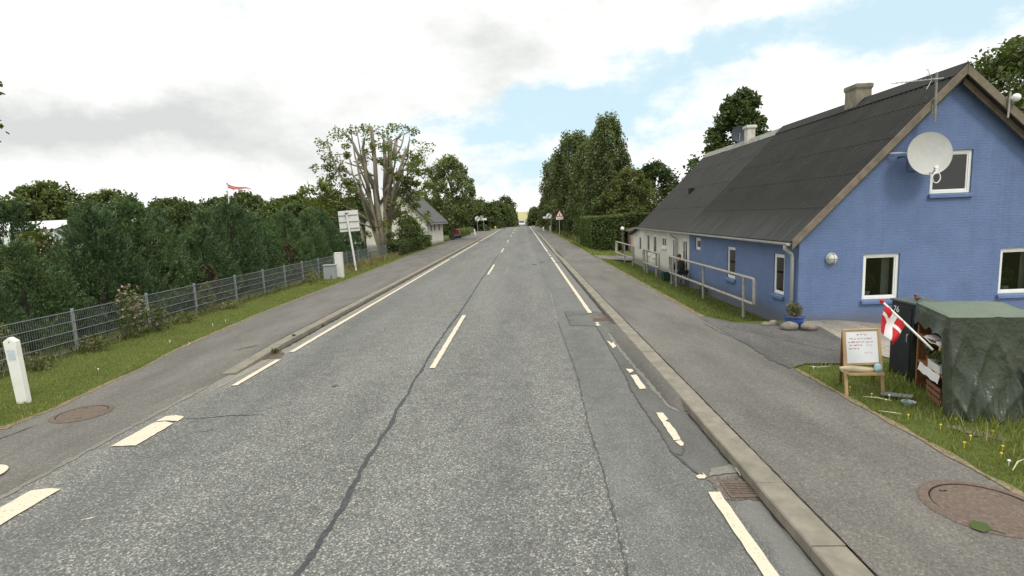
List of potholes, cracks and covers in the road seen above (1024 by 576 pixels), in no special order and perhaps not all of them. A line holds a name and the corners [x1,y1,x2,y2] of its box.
drain grate [720,481,759,498]
manhole cover [917,480,1024,538]
crack [186,414,255,433]
manhole cover [48,404,114,423]
crack [548,289,697,576]
crack [293,255,498,576]
